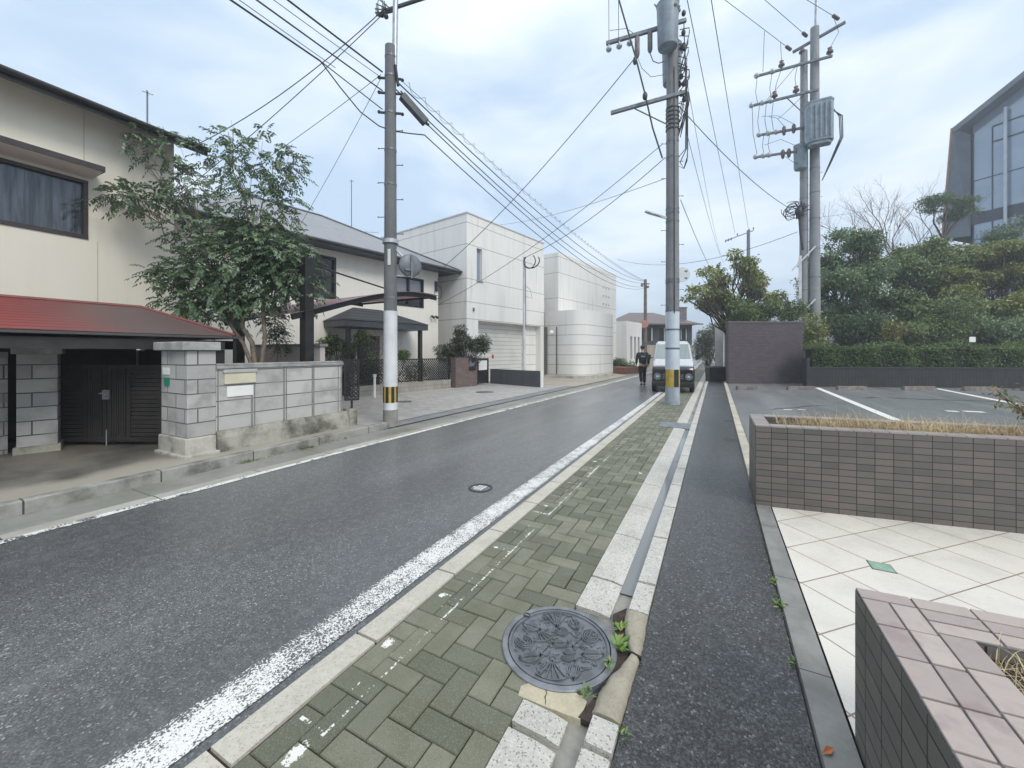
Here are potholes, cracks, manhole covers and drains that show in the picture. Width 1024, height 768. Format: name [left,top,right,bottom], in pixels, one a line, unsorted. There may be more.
utility cover [468,483,493,492]
manhole cover [502,606,617,698]
